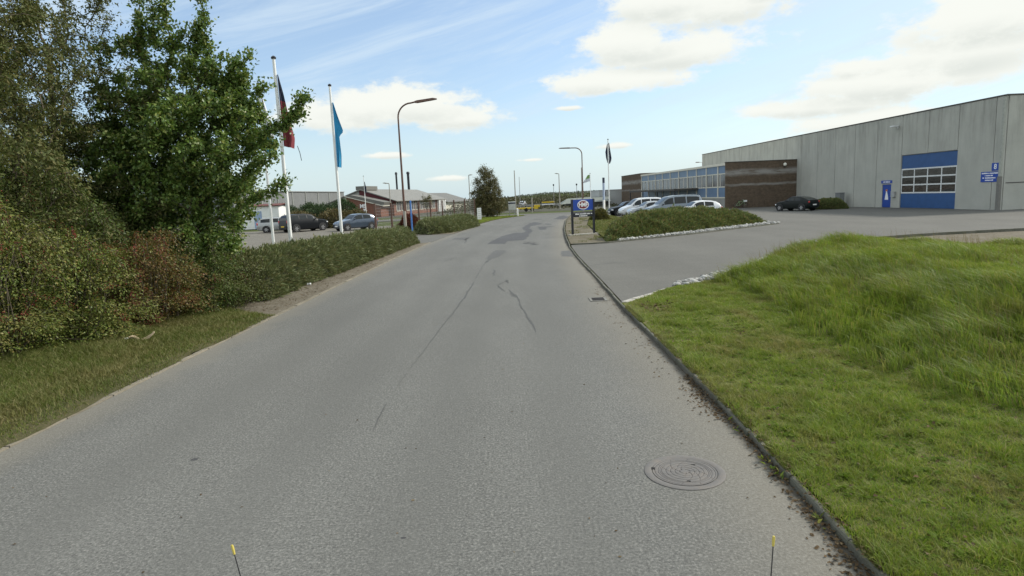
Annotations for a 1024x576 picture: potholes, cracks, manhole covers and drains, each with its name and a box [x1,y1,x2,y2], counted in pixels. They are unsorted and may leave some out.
manhole cover [644,455,726,490]
